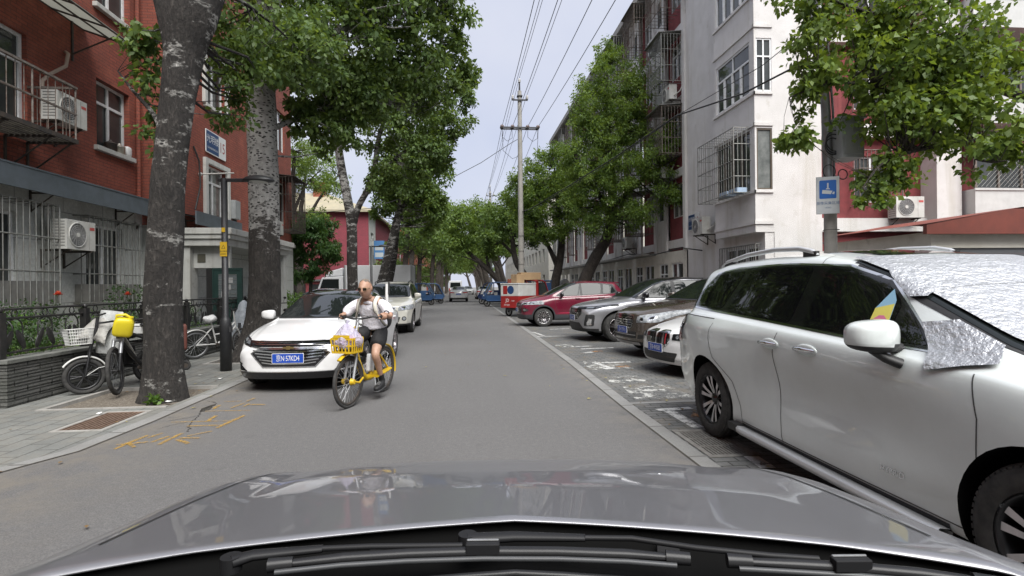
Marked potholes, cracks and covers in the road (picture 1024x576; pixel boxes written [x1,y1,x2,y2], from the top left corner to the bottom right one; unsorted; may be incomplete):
drain grate [48,410,153,433]
drain grate [671,429,761,458]
